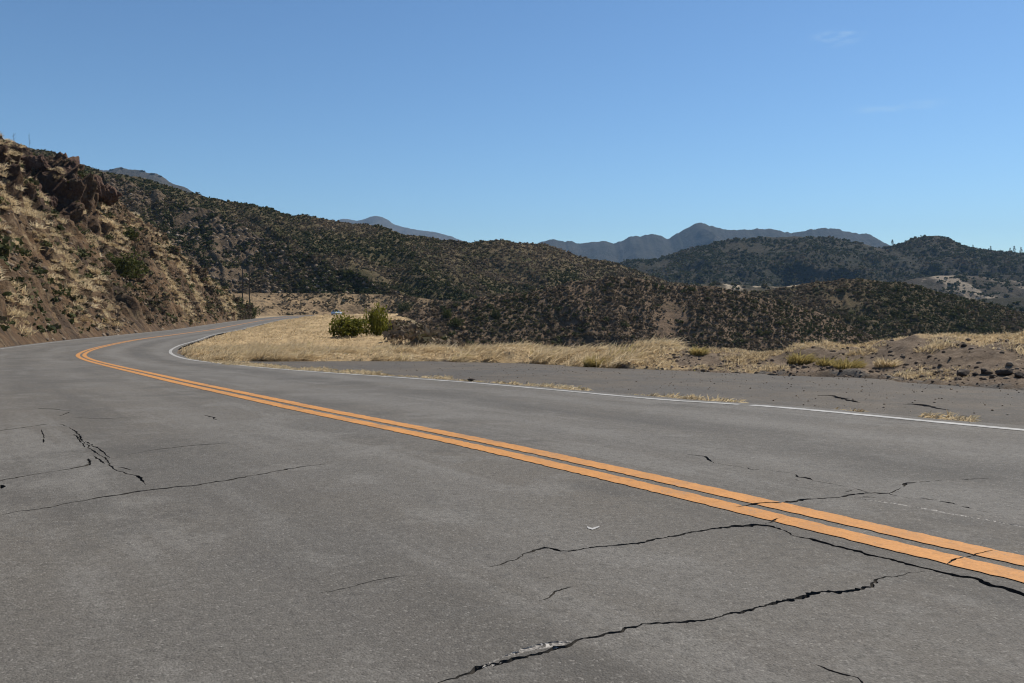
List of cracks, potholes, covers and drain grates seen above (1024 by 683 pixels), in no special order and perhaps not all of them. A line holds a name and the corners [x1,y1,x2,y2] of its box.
crack [322,454,1024,683]
crack [0,408,321,515]
